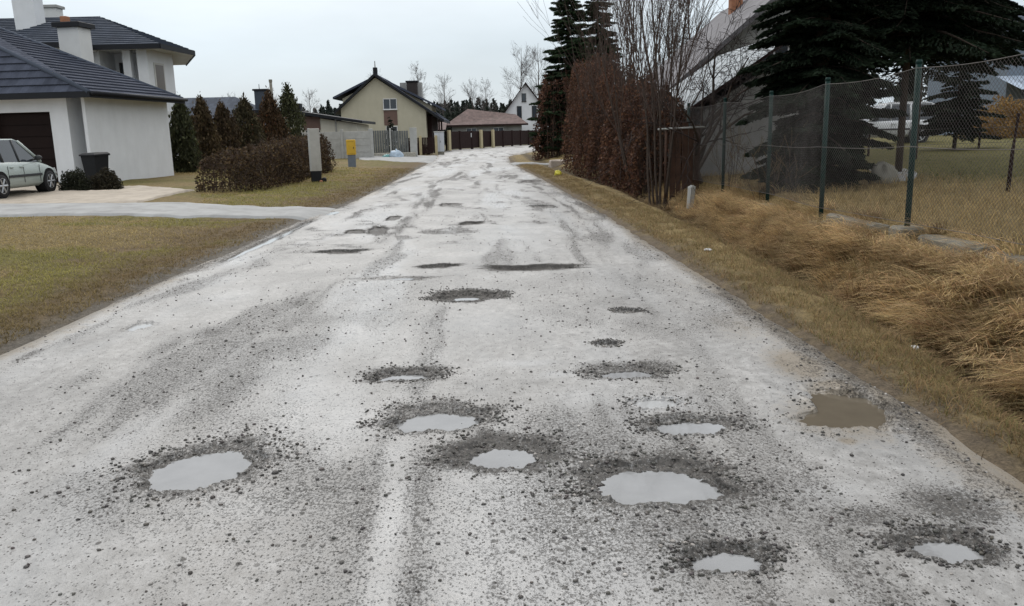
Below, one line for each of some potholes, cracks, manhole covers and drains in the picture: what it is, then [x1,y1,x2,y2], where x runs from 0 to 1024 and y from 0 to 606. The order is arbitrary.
pothole [648,526,799,583]
pothole [73,422,321,513]
pothole [475,263,589,271]
pothole [609,405,770,440]
pothole [356,387,531,441]
pothole [517,438,814,532]
pothole [398,286,518,305]
pothole [607,306,650,314]
pothole [846,512,1024,575]
pothole [390,414,611,480]
pothole [557,357,692,383]
pothole [348,361,462,384]
